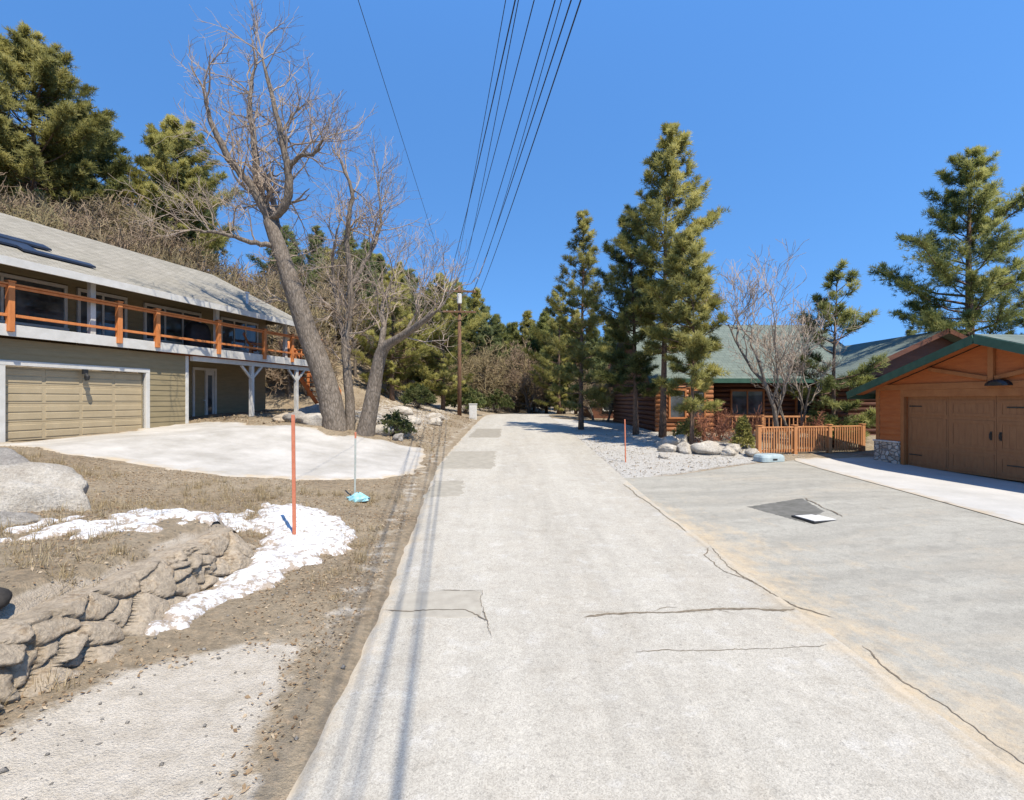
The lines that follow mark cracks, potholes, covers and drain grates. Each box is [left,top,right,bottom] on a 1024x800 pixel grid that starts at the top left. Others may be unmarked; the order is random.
crack [624,485,685,531]
crack [641,644,826,652]
crack [586,543,830,617]
